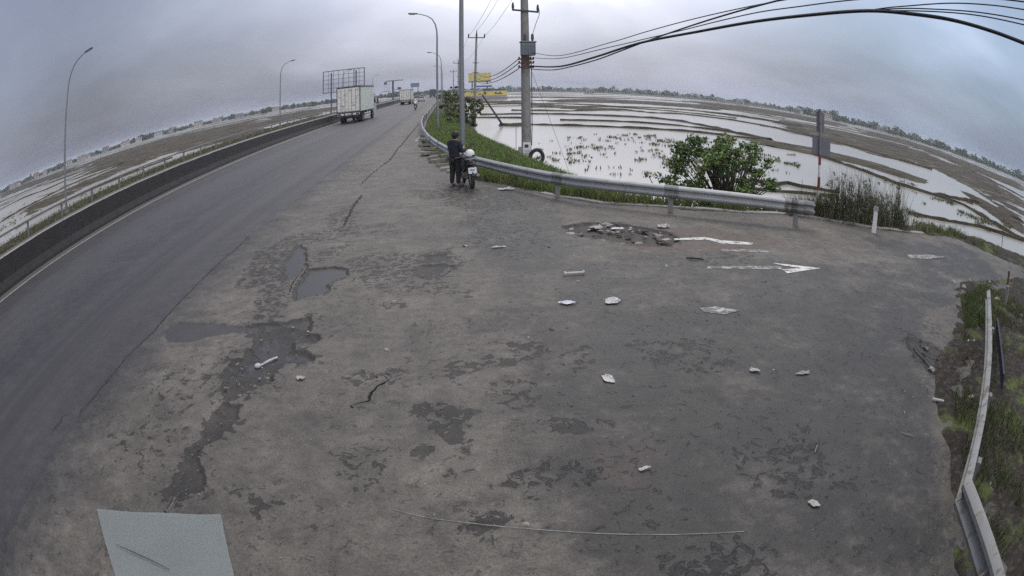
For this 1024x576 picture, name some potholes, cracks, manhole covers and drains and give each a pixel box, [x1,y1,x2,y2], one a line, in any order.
crack [351,373,407,408]
pothole [292,266,349,301]
crack [343,123,420,227]
pothole [562,222,680,247]
pothole [280,245,309,281]
